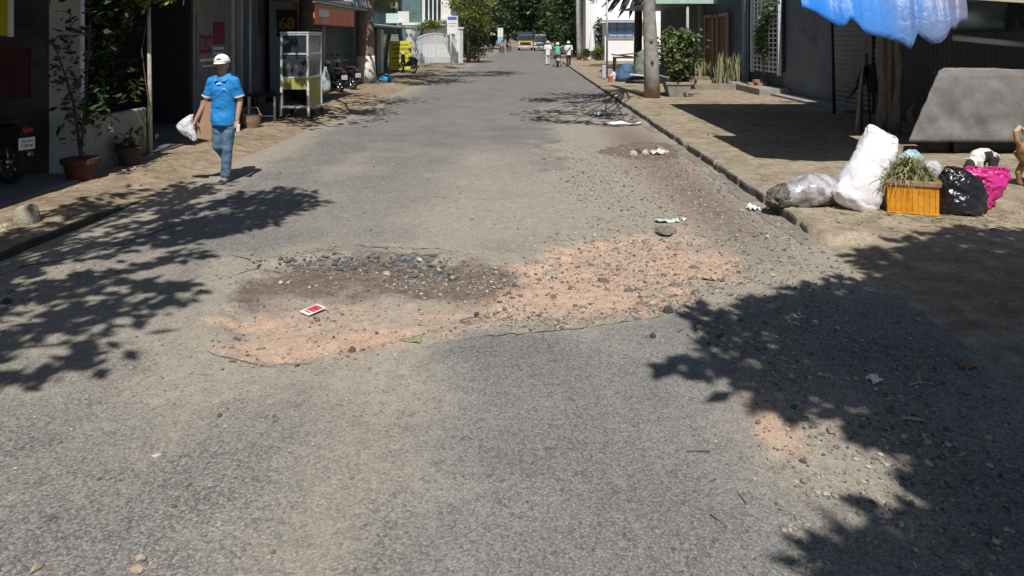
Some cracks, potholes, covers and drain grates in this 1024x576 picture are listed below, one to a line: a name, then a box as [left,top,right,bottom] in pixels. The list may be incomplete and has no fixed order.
pothole [601,143,678,160]
pothole [495,229,750,331]
crack [436,315,665,344]
pothole [212,250,508,368]
